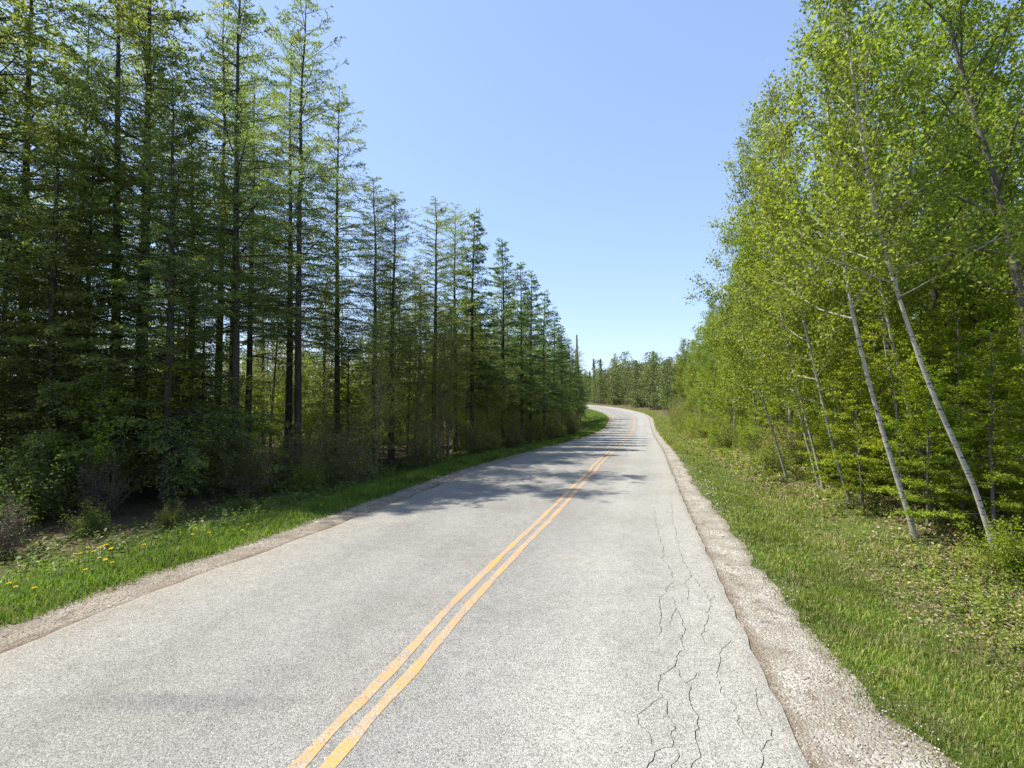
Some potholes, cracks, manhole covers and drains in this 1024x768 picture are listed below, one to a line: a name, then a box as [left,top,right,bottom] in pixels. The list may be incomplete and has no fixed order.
crack [718,646,774,768]
crack [637,512,702,768]
